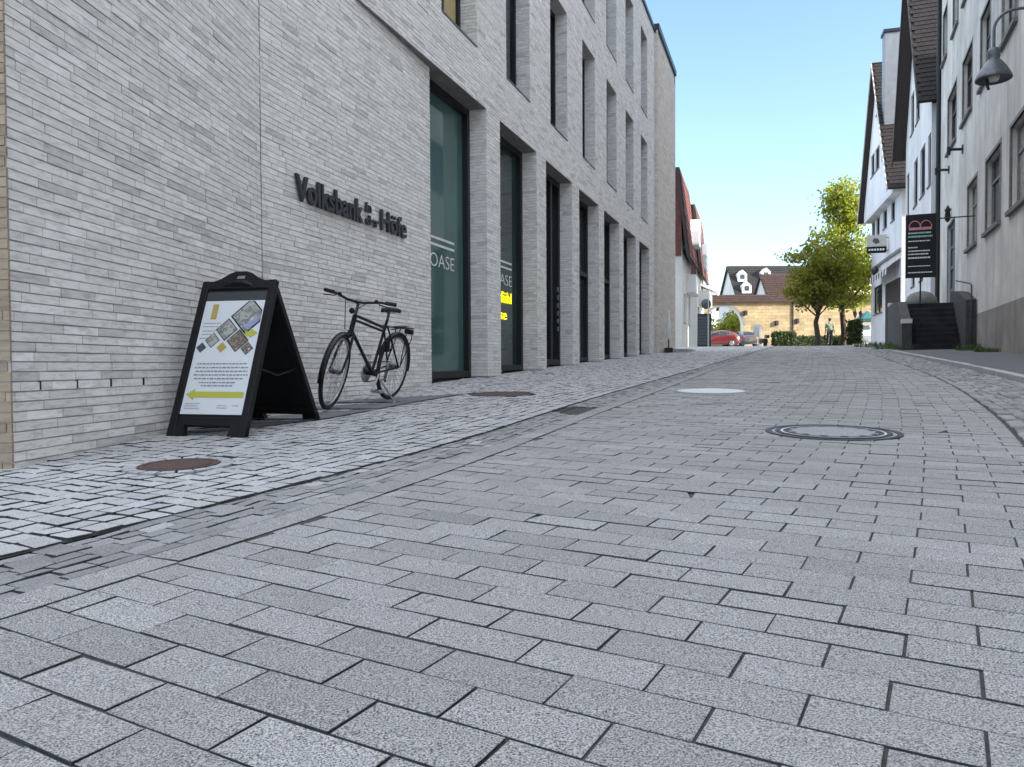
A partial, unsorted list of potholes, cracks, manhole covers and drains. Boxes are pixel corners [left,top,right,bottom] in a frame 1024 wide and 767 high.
manhole cover [765,424,904,442]
manhole cover [122,456,234,476]
